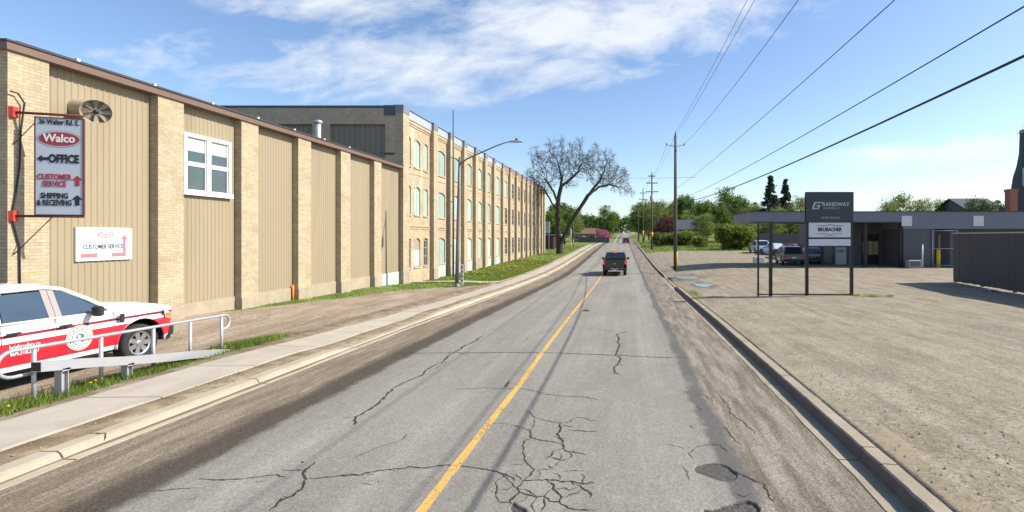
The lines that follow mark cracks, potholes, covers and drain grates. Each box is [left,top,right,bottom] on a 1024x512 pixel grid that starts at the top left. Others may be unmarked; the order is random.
crack [154,411,595,512]
crack [330,328,679,429]
pothole [699,500,762,512]
pothole [692,462,739,483]
crack [670,394,755,478]
